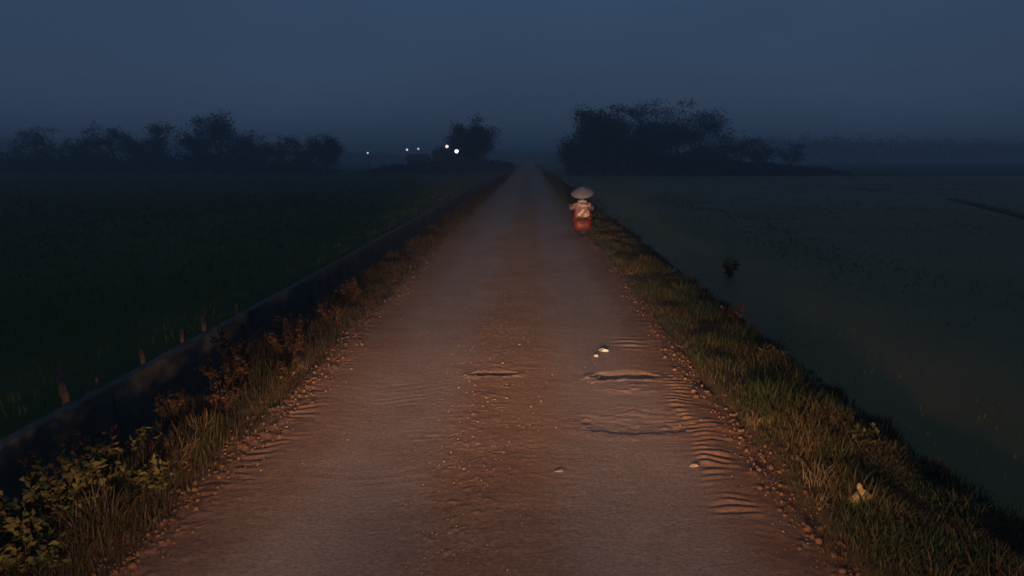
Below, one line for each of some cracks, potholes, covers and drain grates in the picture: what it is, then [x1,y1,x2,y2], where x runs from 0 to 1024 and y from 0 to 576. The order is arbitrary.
pothole [577,401,703,436]
pothole [590,369,662,380]
